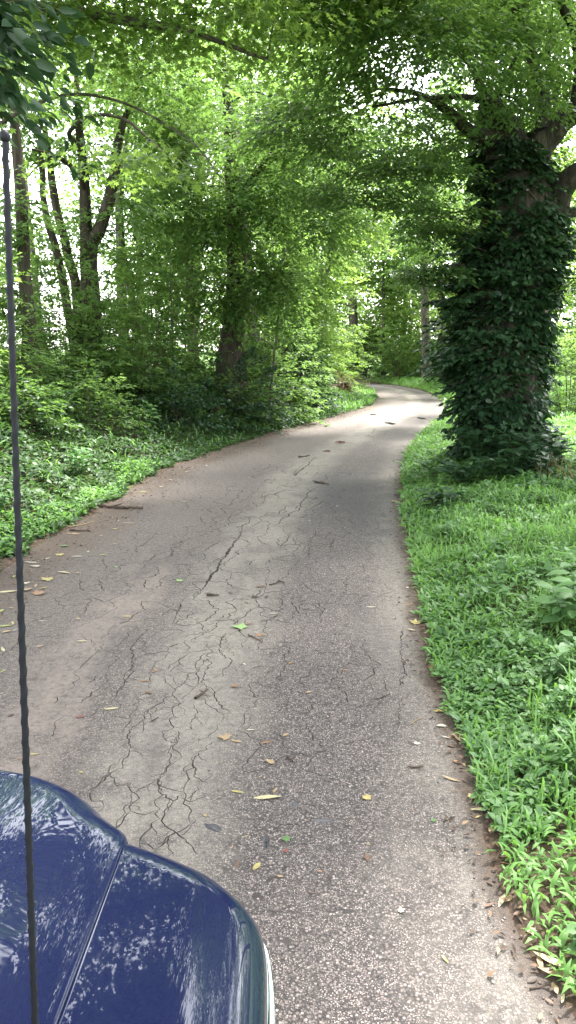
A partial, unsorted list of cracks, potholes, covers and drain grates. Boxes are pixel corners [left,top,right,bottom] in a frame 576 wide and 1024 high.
crack [331,628,407,728]
crack [2,458,391,855]
